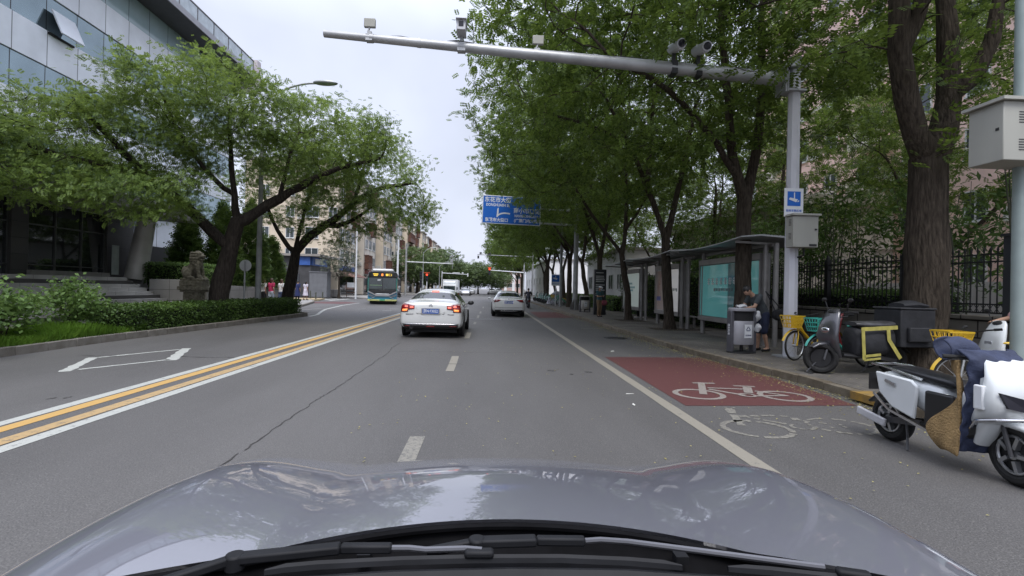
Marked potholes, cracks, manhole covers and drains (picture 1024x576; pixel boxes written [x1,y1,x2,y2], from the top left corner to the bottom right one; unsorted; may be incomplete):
crack [218,345,412,467]
